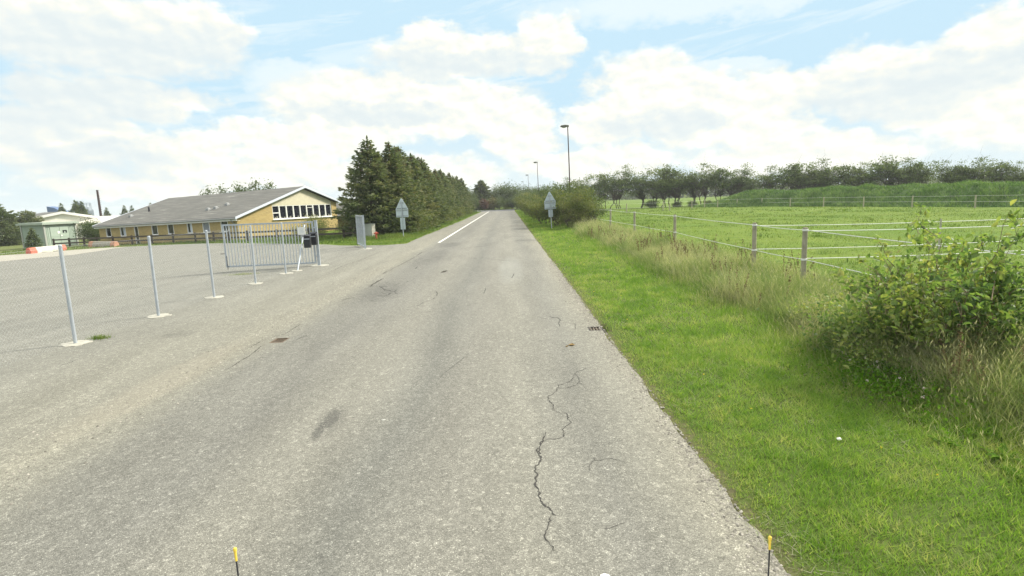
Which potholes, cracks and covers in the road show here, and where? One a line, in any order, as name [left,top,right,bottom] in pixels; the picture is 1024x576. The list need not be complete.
crack [534,368,586,550]
